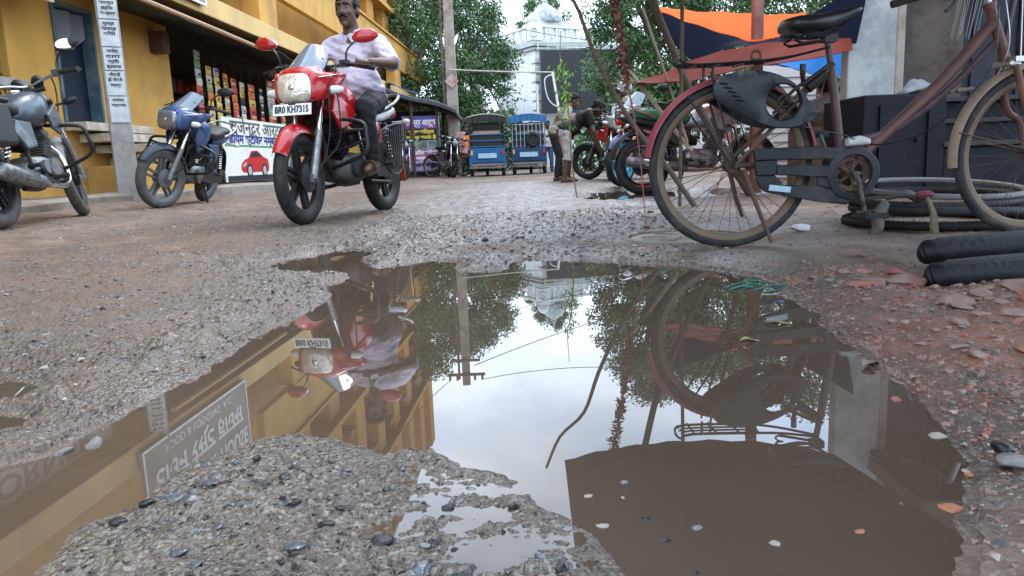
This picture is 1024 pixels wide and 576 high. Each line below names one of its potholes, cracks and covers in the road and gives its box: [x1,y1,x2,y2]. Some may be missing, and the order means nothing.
pothole [0,244,1004,576]
